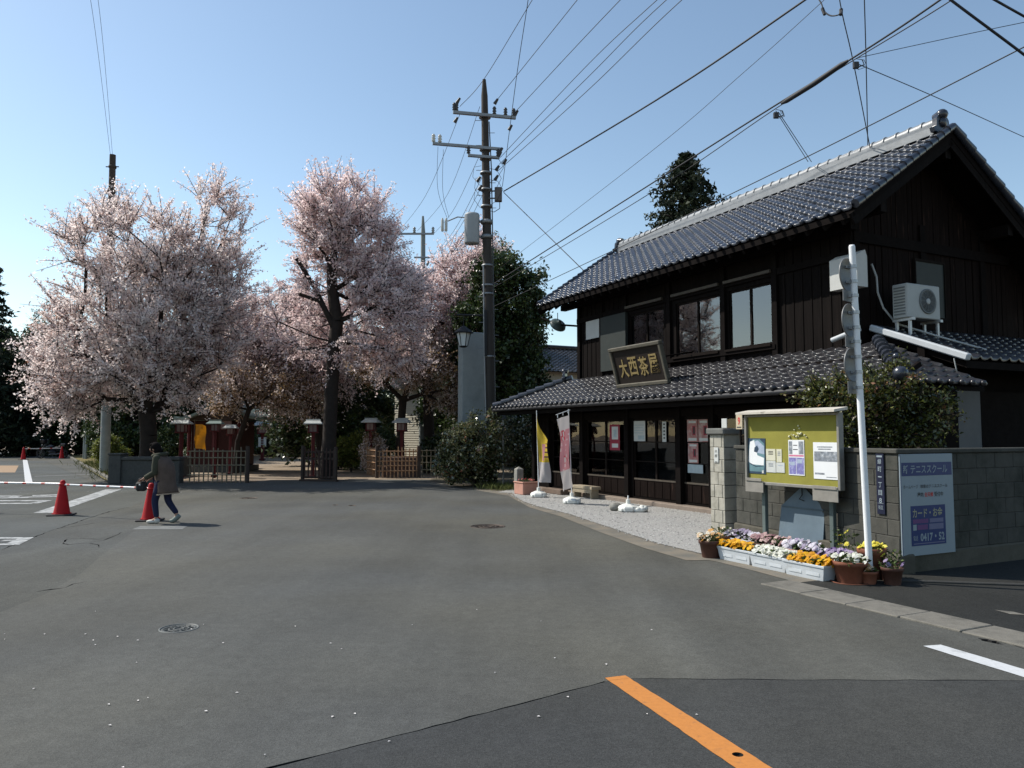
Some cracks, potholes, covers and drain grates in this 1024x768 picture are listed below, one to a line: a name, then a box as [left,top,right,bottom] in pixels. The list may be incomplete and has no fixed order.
crack [2,508,123,550]
manhole cover [158,623,199,633]
